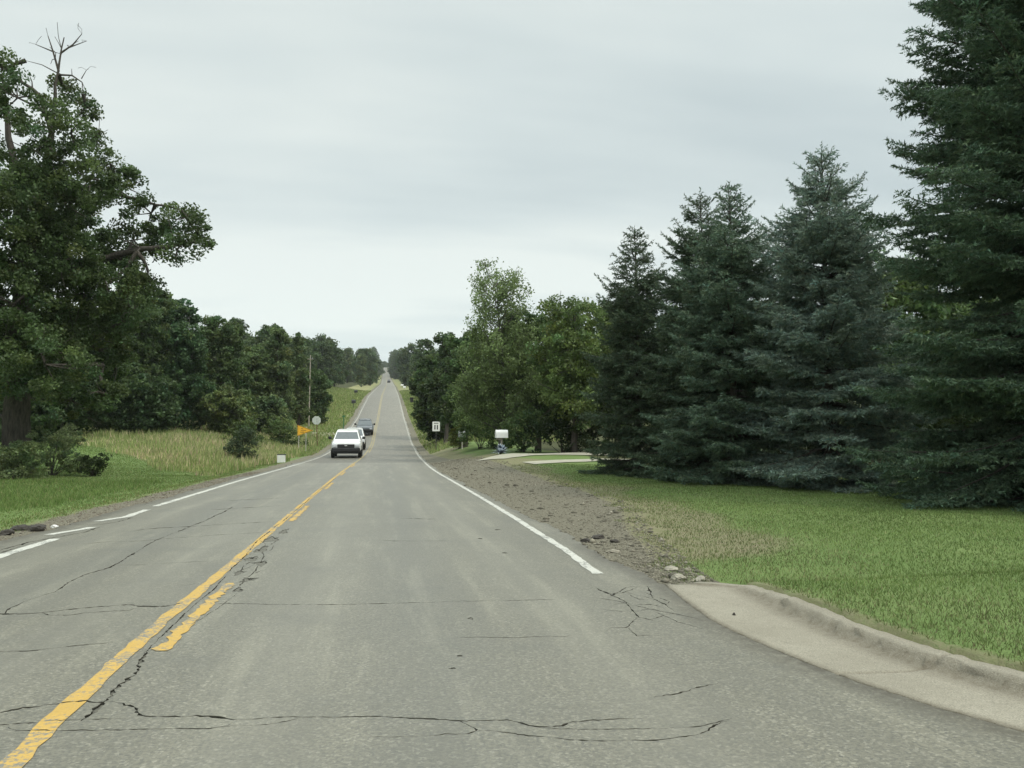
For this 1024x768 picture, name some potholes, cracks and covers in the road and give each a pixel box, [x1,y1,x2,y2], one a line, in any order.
crack [597,586,697,636]
crack [0,498,554,615]
crack [0,701,731,742]
